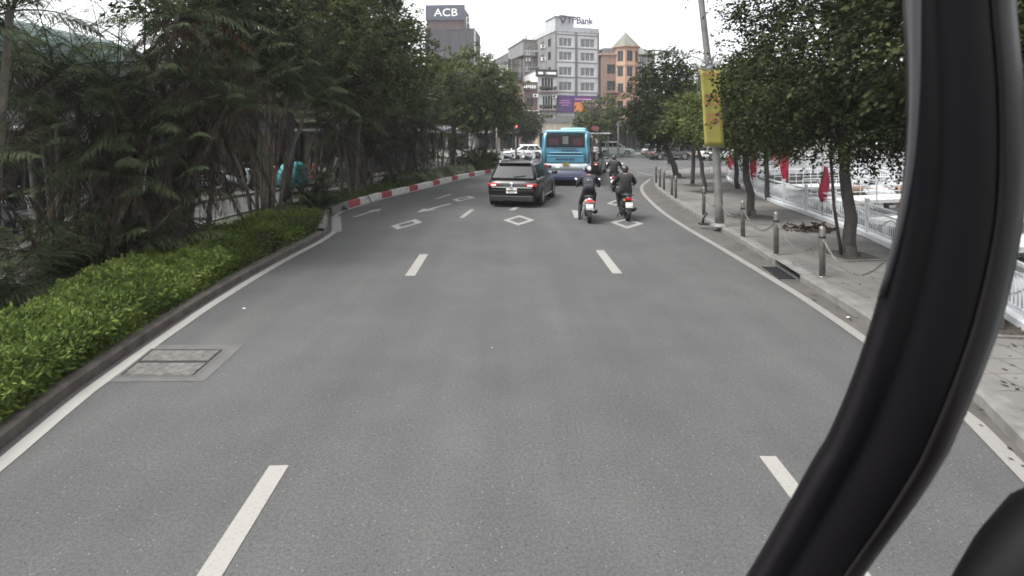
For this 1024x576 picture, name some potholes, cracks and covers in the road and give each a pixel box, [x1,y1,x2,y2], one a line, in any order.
manhole cover [108,345,243,382]
drain grate [762,259,811,279]
